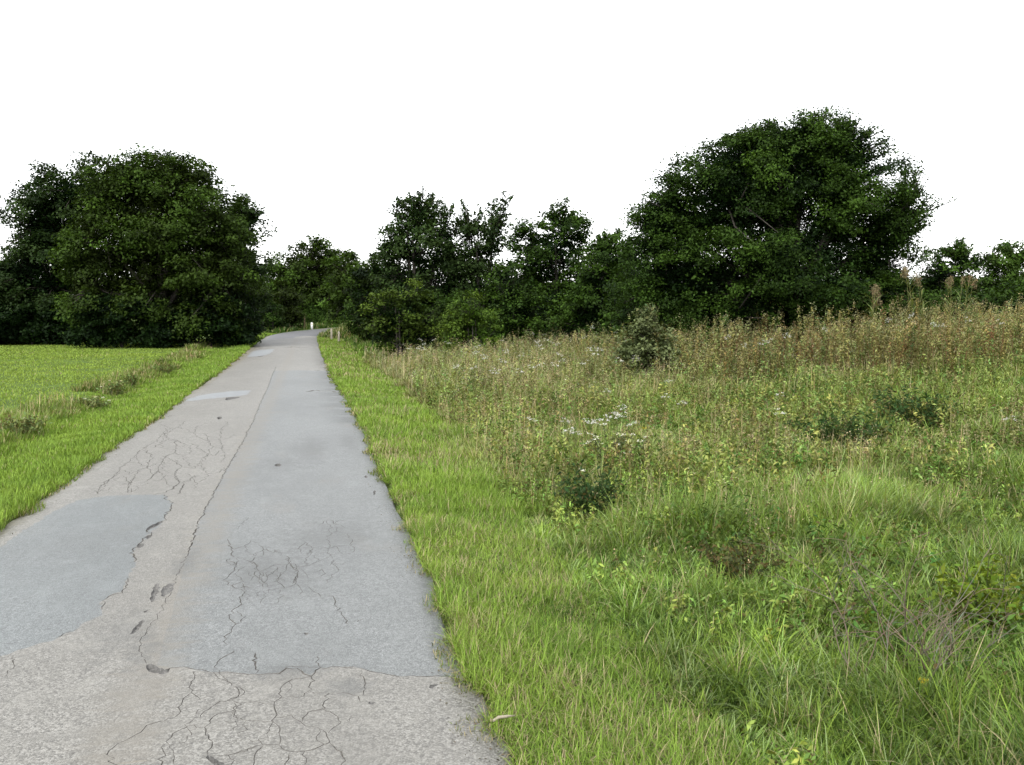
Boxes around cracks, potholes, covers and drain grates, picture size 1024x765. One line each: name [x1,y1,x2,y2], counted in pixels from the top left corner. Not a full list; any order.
pothole [146,664,170,674]
crack [106,520,453,765]
pothole [161,583,175,597]
crack [91,367,276,664]
